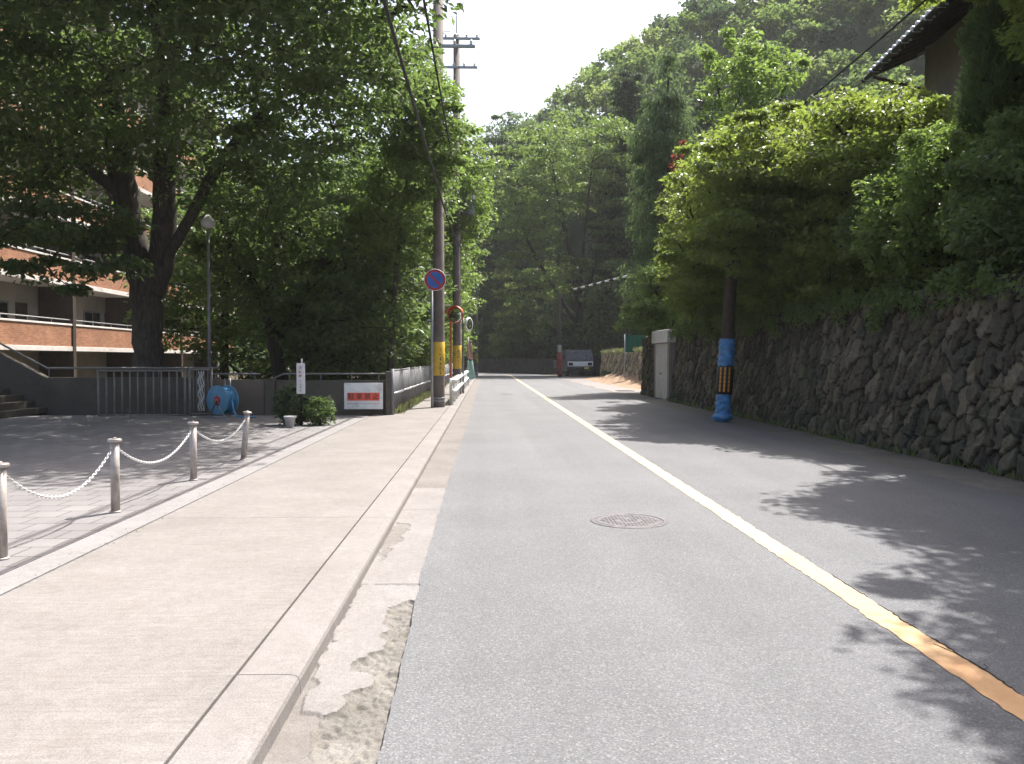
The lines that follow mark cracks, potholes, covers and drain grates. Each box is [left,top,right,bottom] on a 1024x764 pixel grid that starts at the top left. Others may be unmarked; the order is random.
pothole [308,600,415,764]
manhole cover [590,513,668,529]
